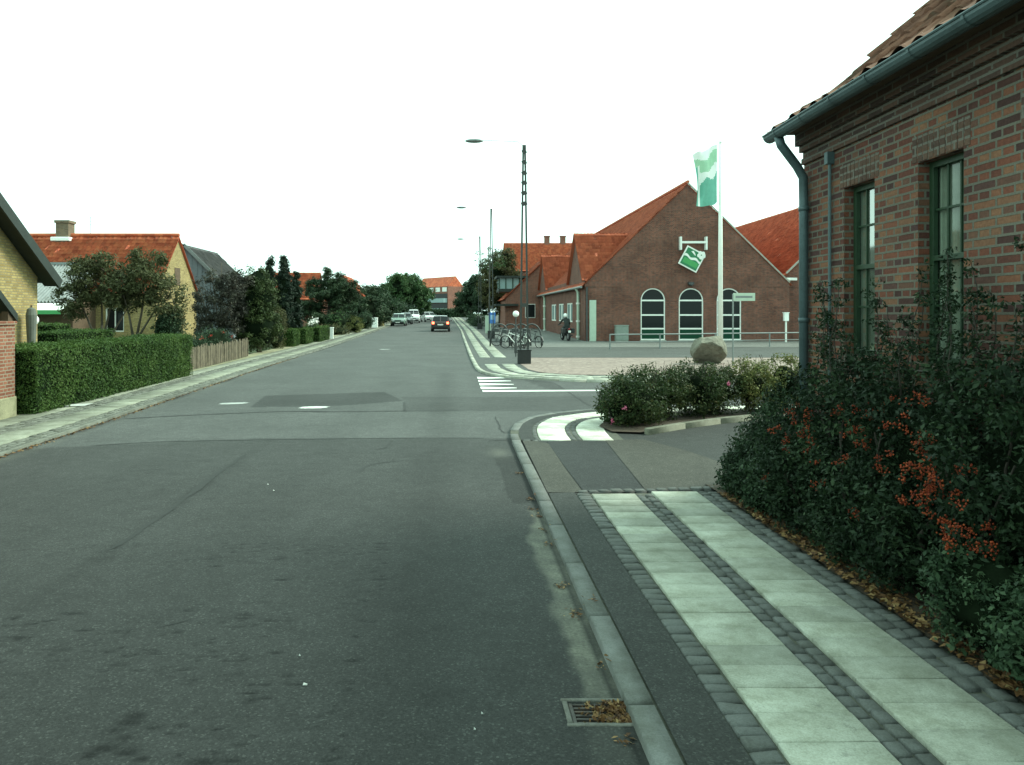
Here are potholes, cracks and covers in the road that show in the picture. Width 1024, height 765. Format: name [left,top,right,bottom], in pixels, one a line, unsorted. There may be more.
drain grate [560,698,633,726]
crack [359,440,395,473]
